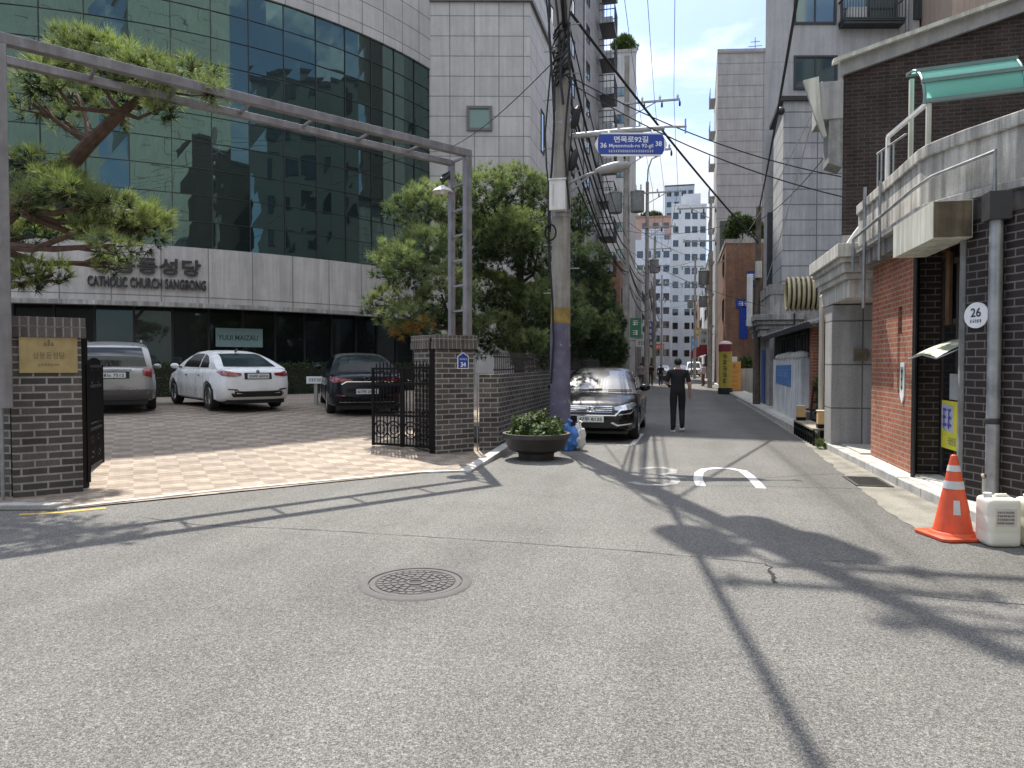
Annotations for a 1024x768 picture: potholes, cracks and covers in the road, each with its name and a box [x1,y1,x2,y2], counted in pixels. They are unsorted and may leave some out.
drain grate [843,476,894,488]
manhole cover [358,566,472,601]
